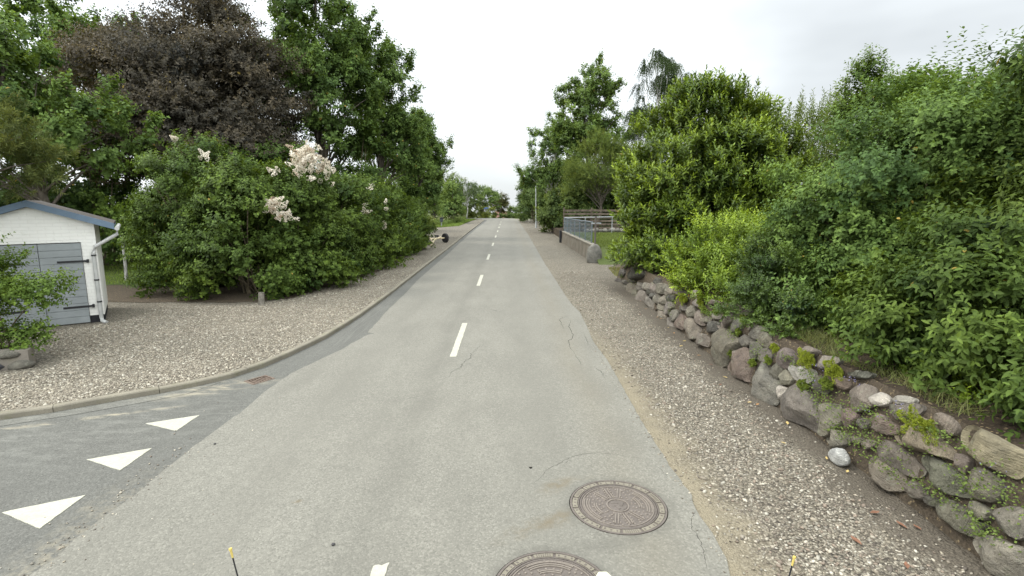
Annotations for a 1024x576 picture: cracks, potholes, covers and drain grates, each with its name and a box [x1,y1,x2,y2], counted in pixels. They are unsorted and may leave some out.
manhole cover [497,551,601,576]
drain grate [244,375,275,385]
manhole cover [570,480,667,535]
